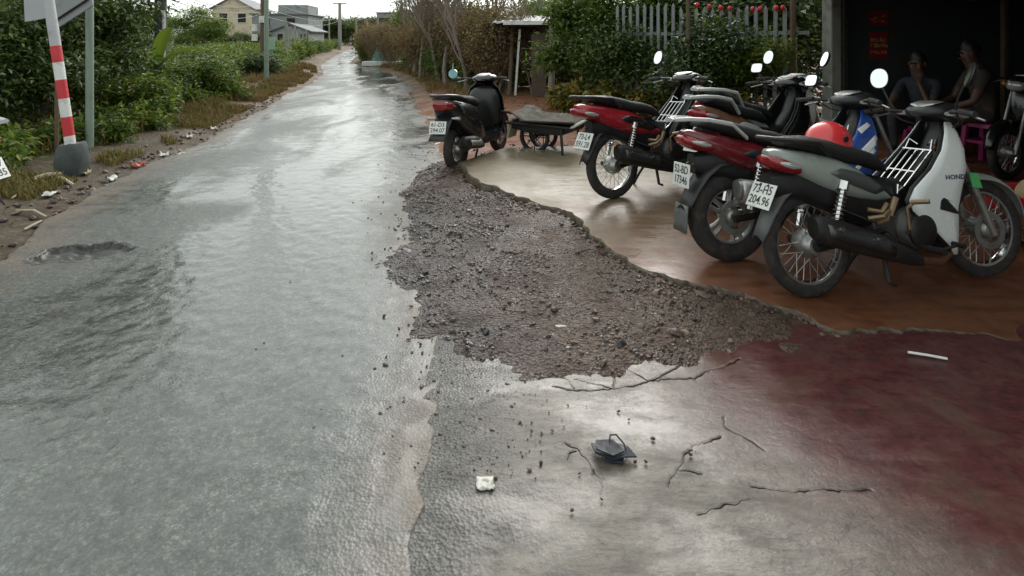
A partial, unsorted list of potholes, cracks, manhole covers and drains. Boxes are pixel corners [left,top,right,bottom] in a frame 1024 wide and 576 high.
crack [668,418,765,484]
pothole [21,240,144,265]
crack [698,486,870,516]
crack [552,359,739,392]
